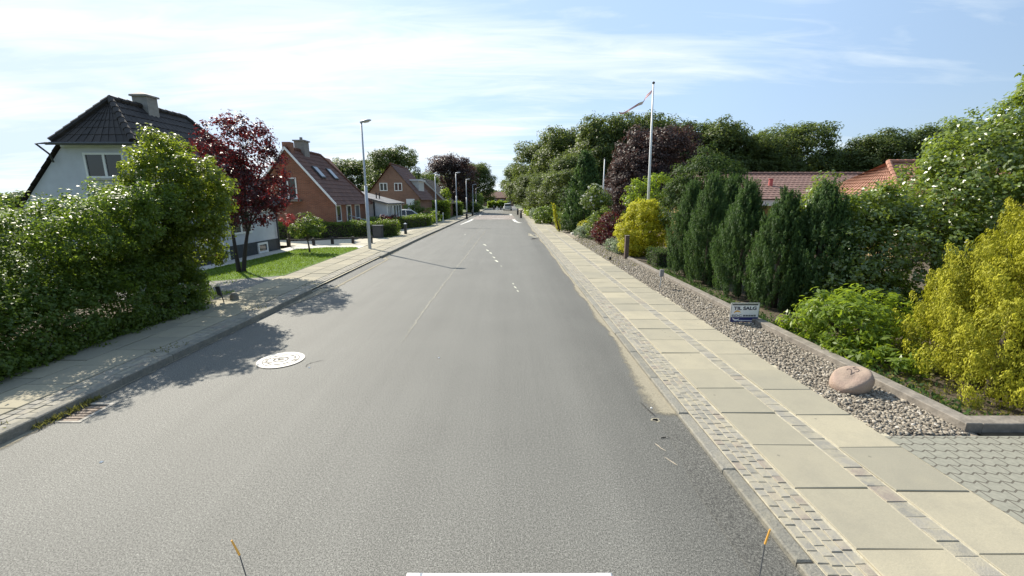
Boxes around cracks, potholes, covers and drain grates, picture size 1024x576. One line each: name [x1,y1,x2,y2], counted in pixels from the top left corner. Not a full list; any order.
drain grate [53,403,117,423]
manhole cover [255,352,306,369]
